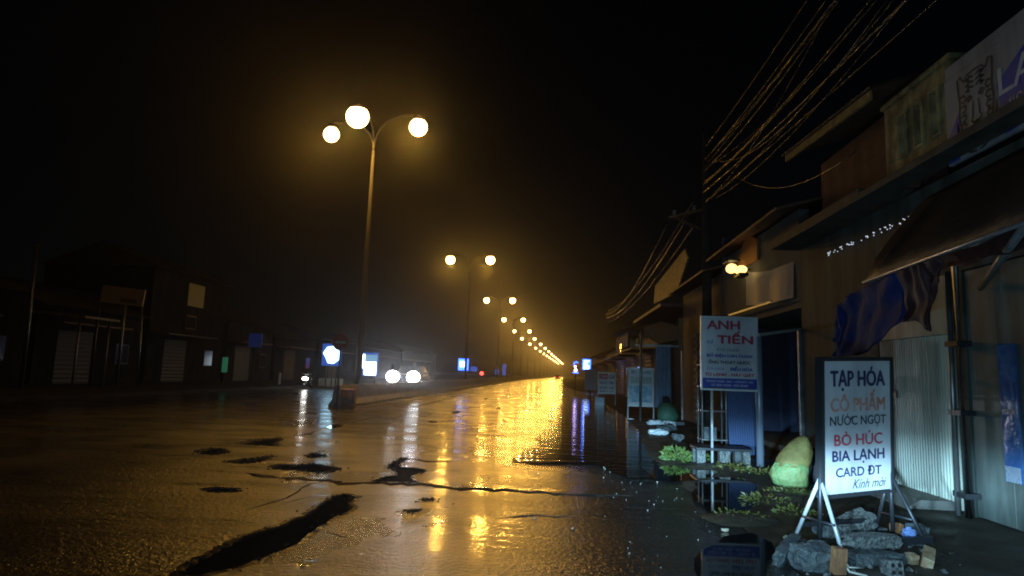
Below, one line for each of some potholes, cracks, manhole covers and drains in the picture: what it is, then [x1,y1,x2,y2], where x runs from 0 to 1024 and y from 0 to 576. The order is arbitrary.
pothole [159,493,362,576]
pothole [235,437,284,446]
crack [247,446,628,510]
pothole [267,463,349,473]
pothole [222,454,276,464]
pothole [191,447,232,455]
pothole [371,457,432,484]
